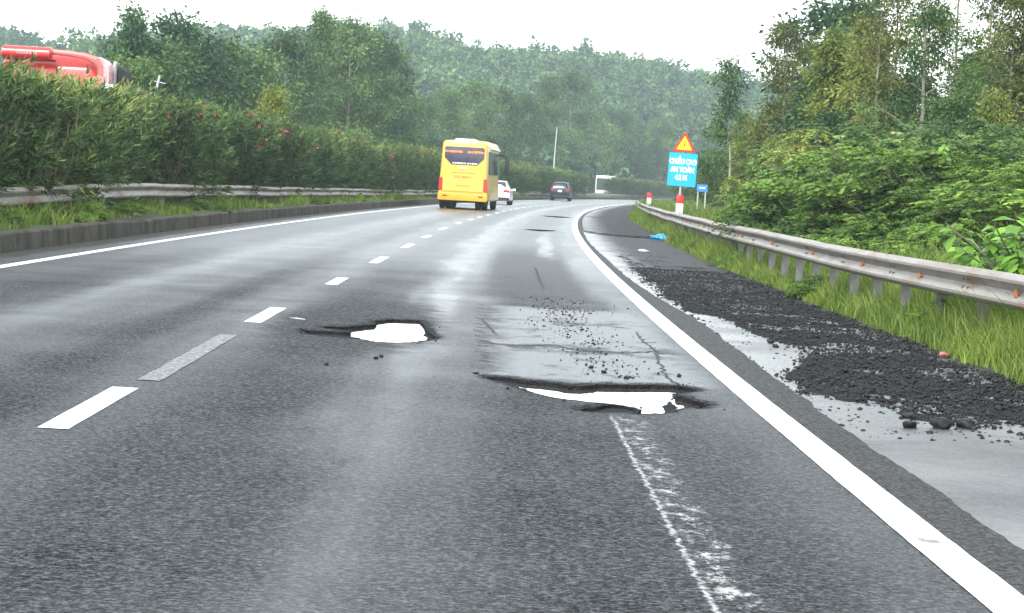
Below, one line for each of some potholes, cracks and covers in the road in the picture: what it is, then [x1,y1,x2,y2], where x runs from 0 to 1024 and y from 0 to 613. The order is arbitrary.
crack [473,304,680,385]
pothole [301,320,436,343]
pothole [487,376,710,414]
